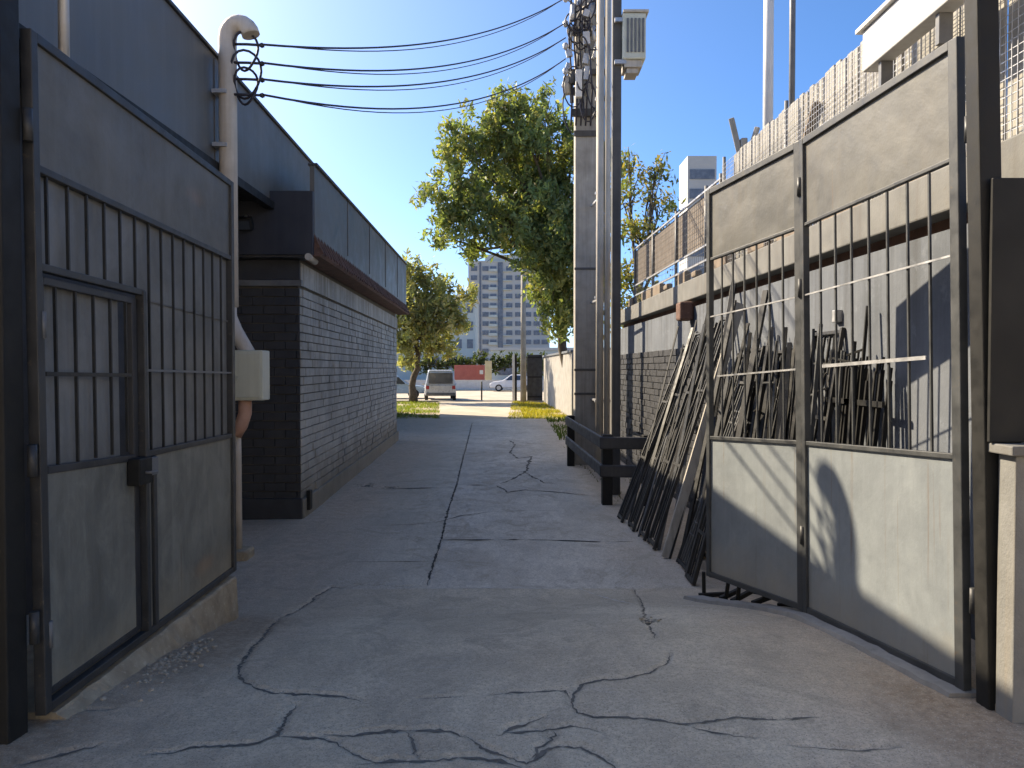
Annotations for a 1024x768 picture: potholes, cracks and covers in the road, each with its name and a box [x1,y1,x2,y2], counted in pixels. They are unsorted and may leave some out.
crack [496,441,600,496]
crack [145,587,810,768]
